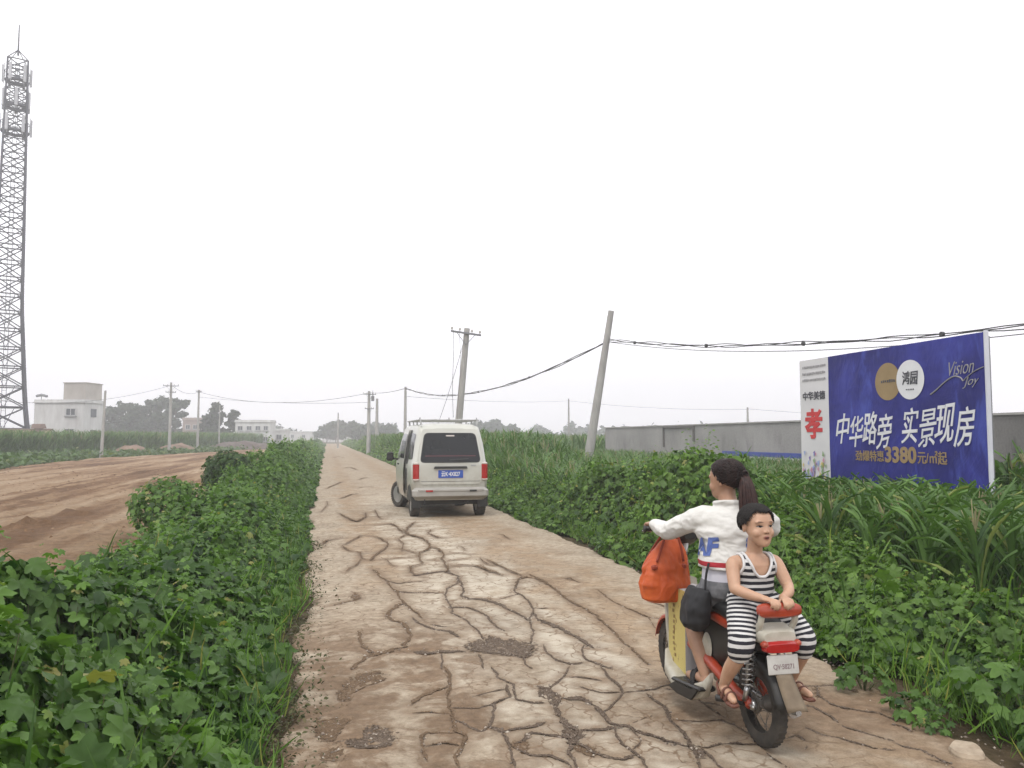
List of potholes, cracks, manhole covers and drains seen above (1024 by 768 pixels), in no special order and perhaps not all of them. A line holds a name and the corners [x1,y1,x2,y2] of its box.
pothole [462,635,541,658]
crack [321,456,953,768]
pothole [338,724,399,749]
pothole [336,668,390,705]
pothole [313,715,353,744]
